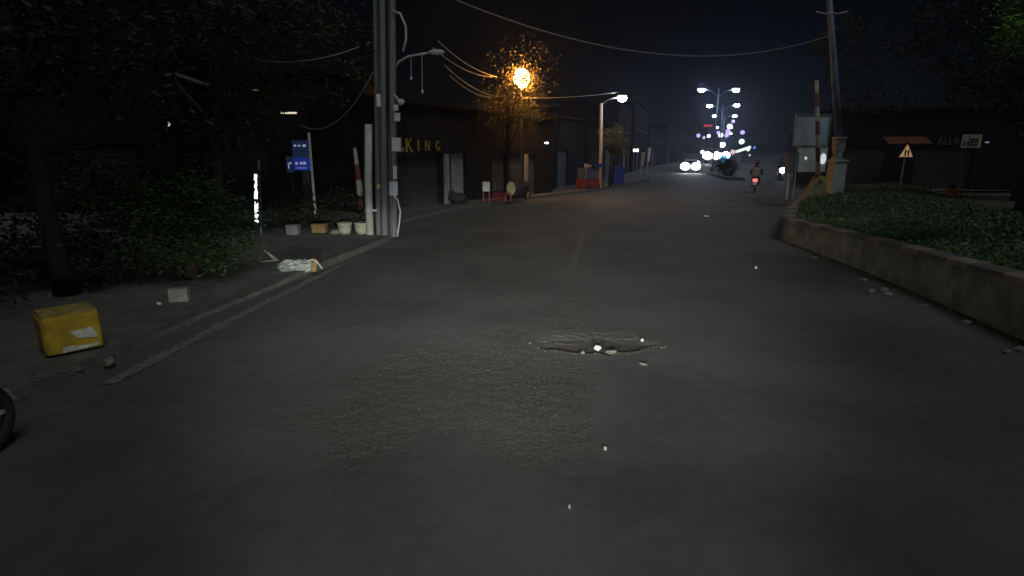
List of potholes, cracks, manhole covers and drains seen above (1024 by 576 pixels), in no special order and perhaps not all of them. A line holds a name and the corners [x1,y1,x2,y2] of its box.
pothole [523,328,666,356]
